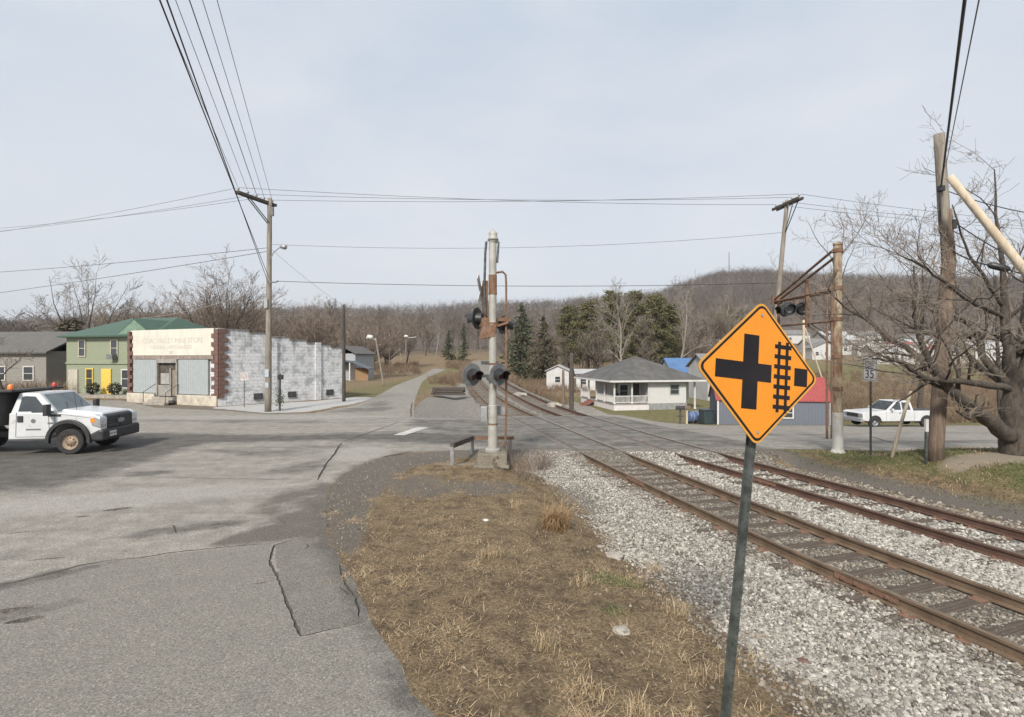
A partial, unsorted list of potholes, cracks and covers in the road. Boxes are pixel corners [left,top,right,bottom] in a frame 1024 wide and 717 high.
crack [339,564,360,619]
crack [317,402,413,480]
